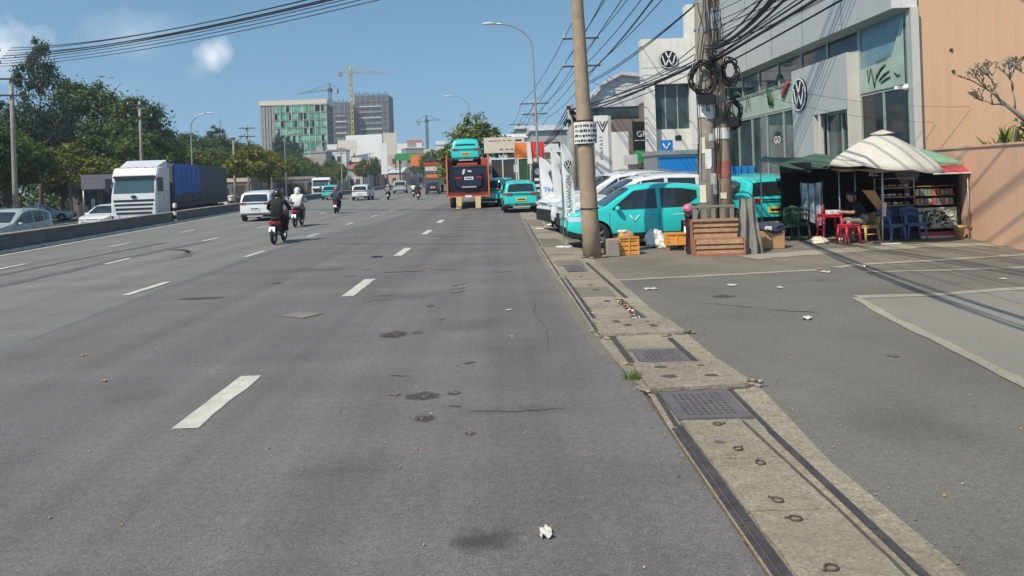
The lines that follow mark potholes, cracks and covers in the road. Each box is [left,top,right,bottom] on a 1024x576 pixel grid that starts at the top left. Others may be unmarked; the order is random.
drain grate [659,389,753,421]
drain grate [631,348,691,362]
pothole [406,391,440,400]
